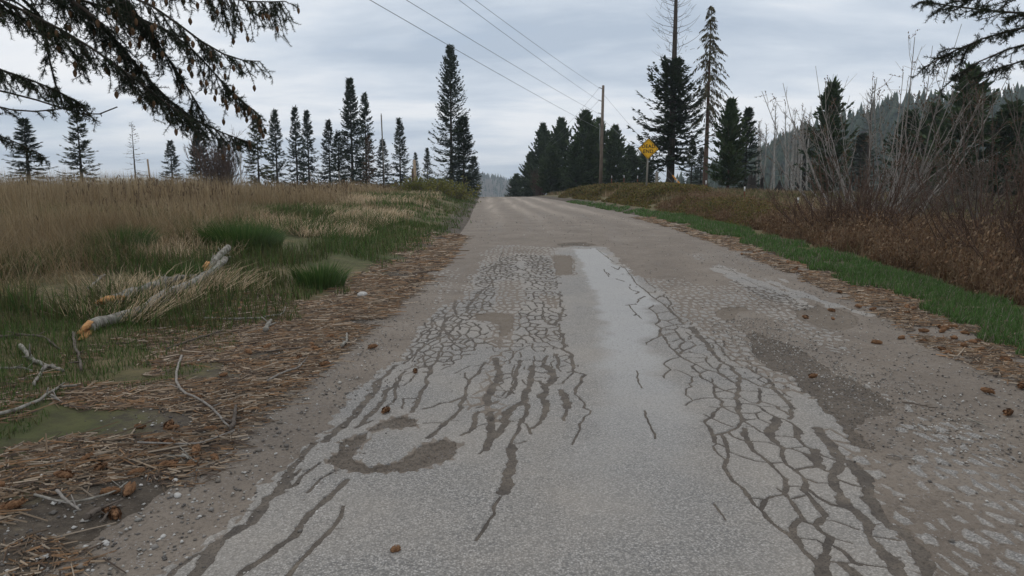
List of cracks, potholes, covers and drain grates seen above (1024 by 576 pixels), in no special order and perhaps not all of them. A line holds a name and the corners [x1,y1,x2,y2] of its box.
crack [597,249,937,576]
crack [167,252,592,576]
